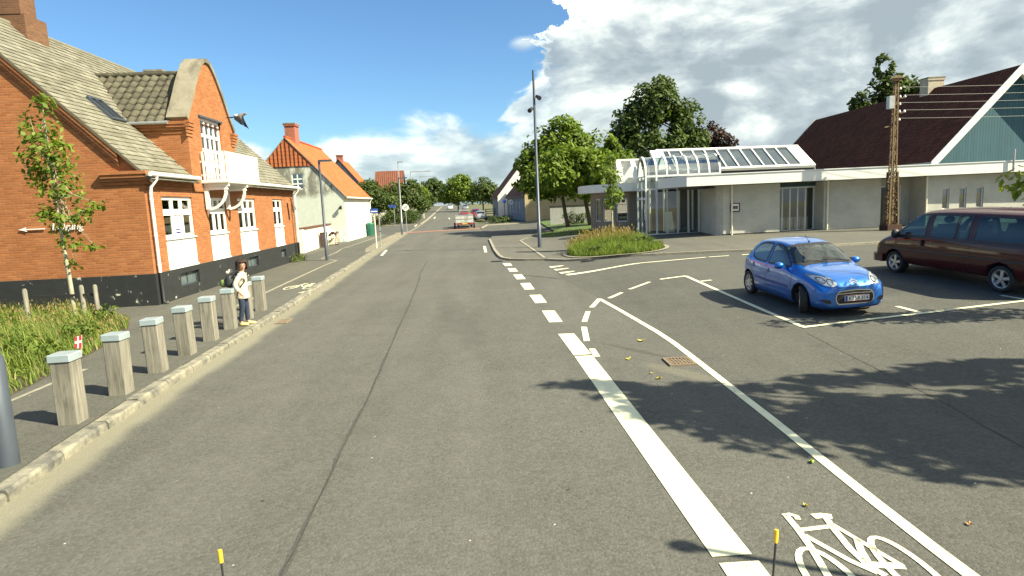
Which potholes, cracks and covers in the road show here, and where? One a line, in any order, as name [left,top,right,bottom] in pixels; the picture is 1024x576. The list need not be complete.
drain grate [662,356,697,367]
